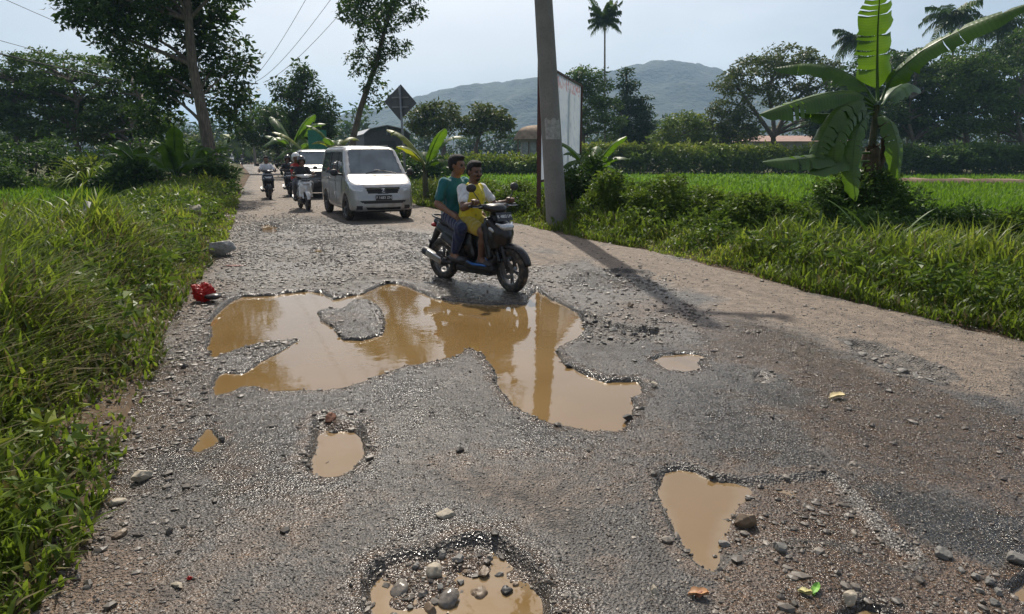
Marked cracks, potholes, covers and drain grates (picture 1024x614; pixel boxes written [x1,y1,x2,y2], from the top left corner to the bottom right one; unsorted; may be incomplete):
pothole [300,412,372,478]
pothole [184,424,223,452]
pothole [201,280,649,432]
pothole [358,530,558,614]
pothole [651,351,708,371]
